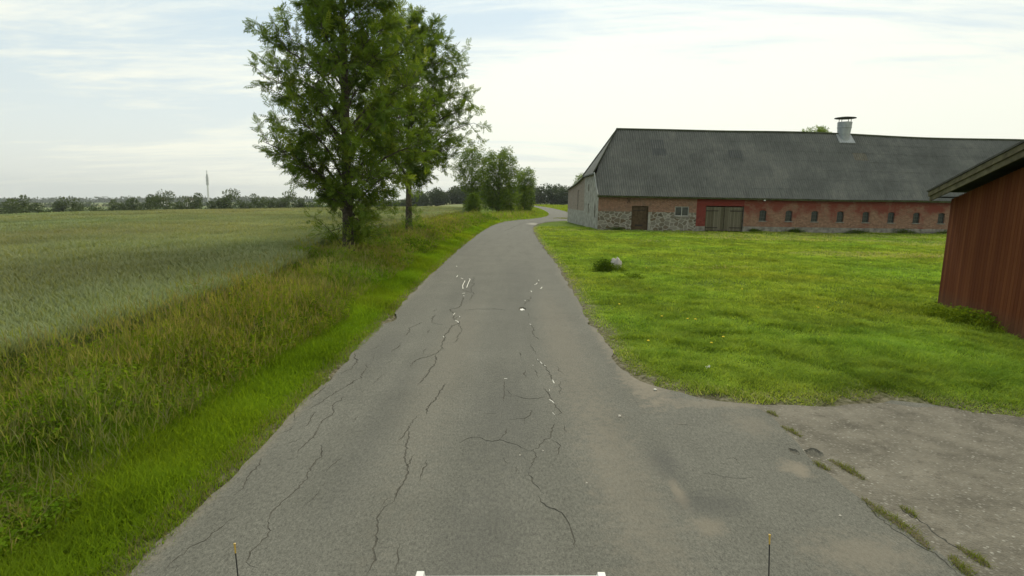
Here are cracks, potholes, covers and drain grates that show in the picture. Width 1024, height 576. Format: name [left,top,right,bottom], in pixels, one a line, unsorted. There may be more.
crack [463,282,576,547]
crack [862,502,957,574]
pothole [804,448,824,458]
crack [160,275,502,573]
